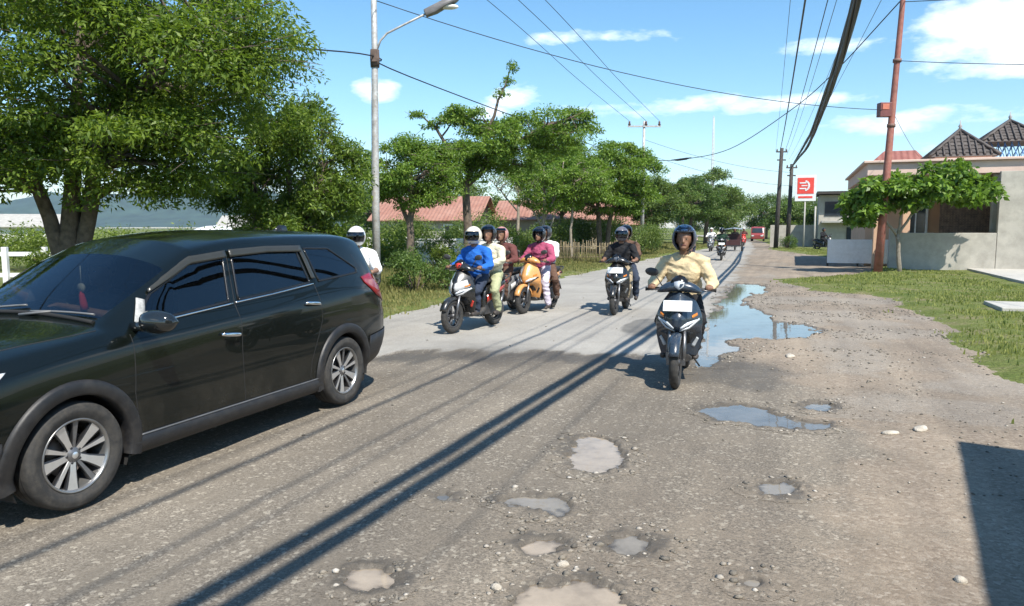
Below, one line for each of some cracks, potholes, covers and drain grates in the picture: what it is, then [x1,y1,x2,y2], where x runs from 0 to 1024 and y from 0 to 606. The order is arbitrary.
pothole [474,485,600,528]
pothole [477,564,664,606]
pothole [727,473,829,504]
pothole [488,525,587,568]
pothole [540,430,649,484]
pothole [680,400,846,435]
pothole [311,551,431,606]
pothole [584,521,682,567]
pothole [685,283,833,369]
